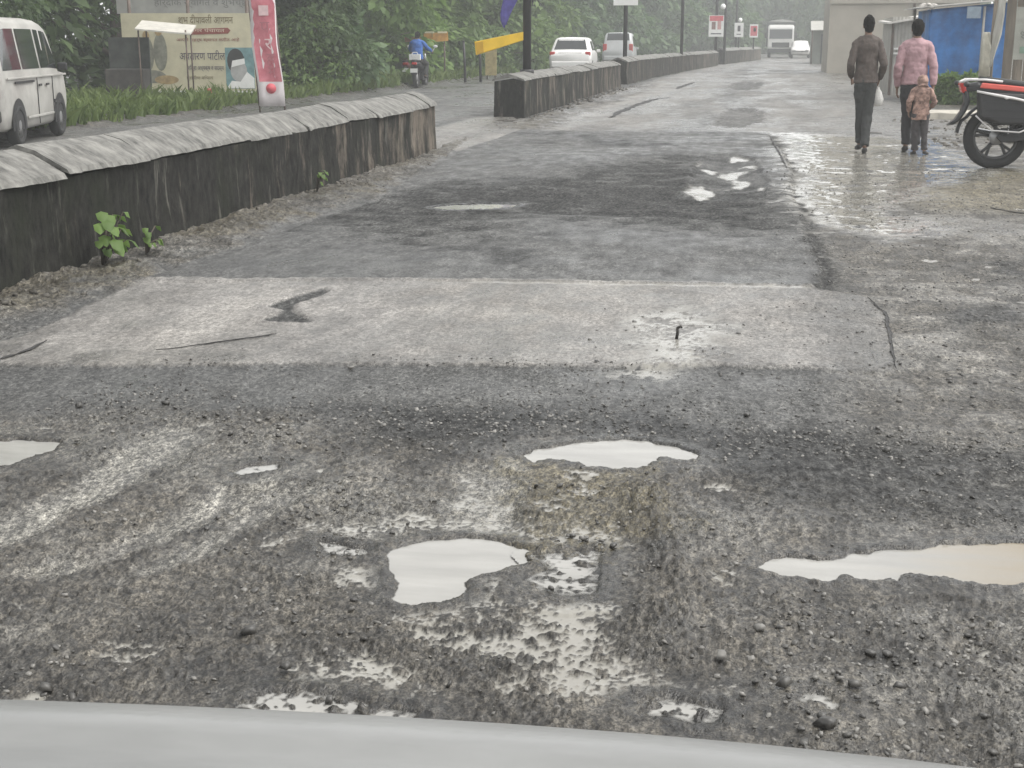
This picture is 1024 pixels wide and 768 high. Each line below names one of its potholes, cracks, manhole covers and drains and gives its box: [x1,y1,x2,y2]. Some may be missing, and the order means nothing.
crack [609,82,695,118]
pothole [744,535,1024,589]
crack [156,333,276,350]
crack [0,340,47,359]
pothole [423,202,529,211]
pothole [0,434,71,467]
pothole [670,153,780,204]
pothole [707,107,770,128]
pothole [371,530,538,611]
pothole [511,434,718,472]
crack [868,297,896,368]
pothole [217,457,294,478]
